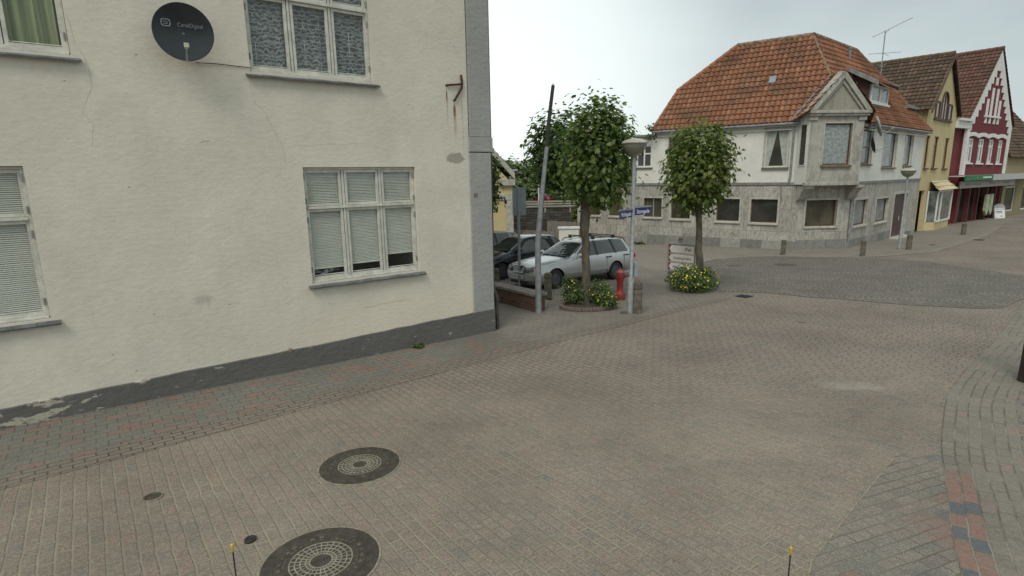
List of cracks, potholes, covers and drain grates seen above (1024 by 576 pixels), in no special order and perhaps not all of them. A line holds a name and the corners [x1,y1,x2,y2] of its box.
manhole cover [317,447,401,486]
utility cover [142,492,163,503]
manhole cover [257,527,381,576]
